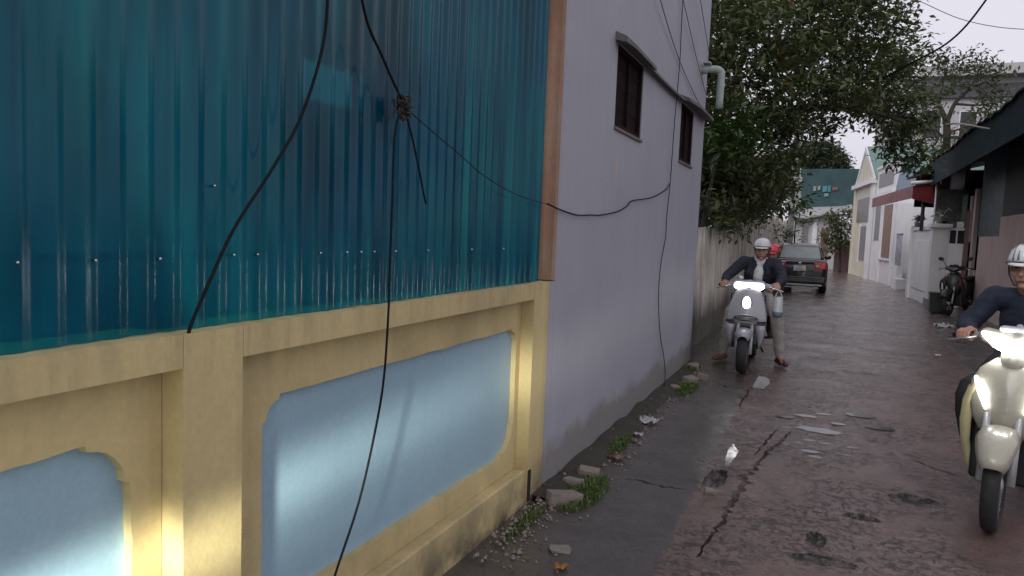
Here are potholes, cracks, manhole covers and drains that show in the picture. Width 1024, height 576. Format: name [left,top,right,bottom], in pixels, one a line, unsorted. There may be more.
pothole [887,493,939,508]
crack [897,453,959,476]
pothole [782,552,858,570]
pothole [702,470,729,489]
crack [719,384,764,409]
pothole [842,513,882,523]
crack [609,429,792,558]
pothole [805,531,827,550]
